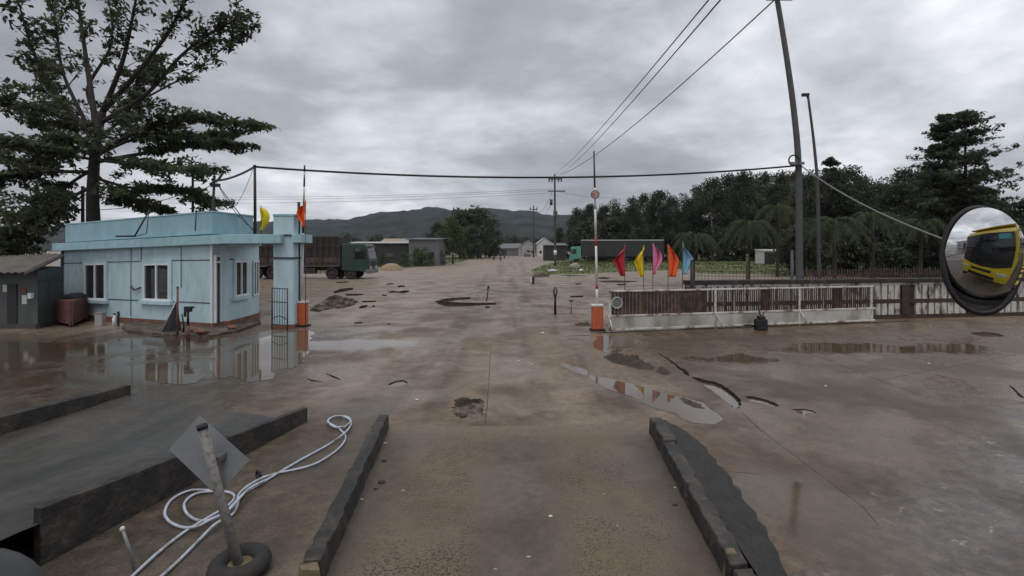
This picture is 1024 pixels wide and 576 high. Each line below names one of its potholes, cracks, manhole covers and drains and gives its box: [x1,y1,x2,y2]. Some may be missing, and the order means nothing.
pothole [435,297,497,306]
pothole [746,396,779,406]
pothole [451,397,486,419]
pothole [692,377,742,408]
pothole [310,295,358,312]
